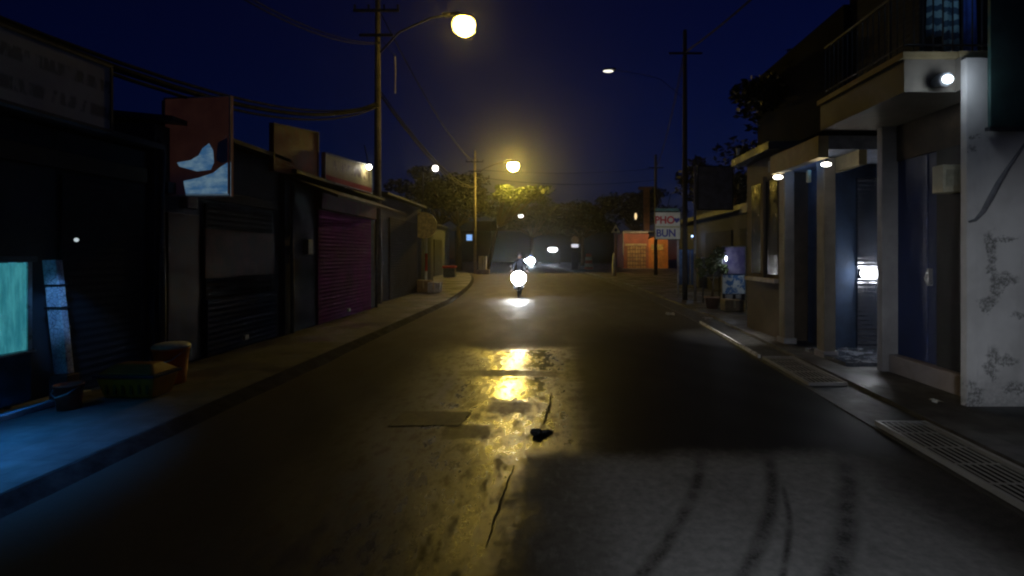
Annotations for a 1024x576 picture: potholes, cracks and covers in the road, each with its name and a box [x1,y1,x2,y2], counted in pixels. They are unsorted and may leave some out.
crack [485,465,515,548]
pothole [530,428,554,442]
drain grate [762,356,848,386]
crack [543,392,552,425]
drain grate [875,420,1024,512]
